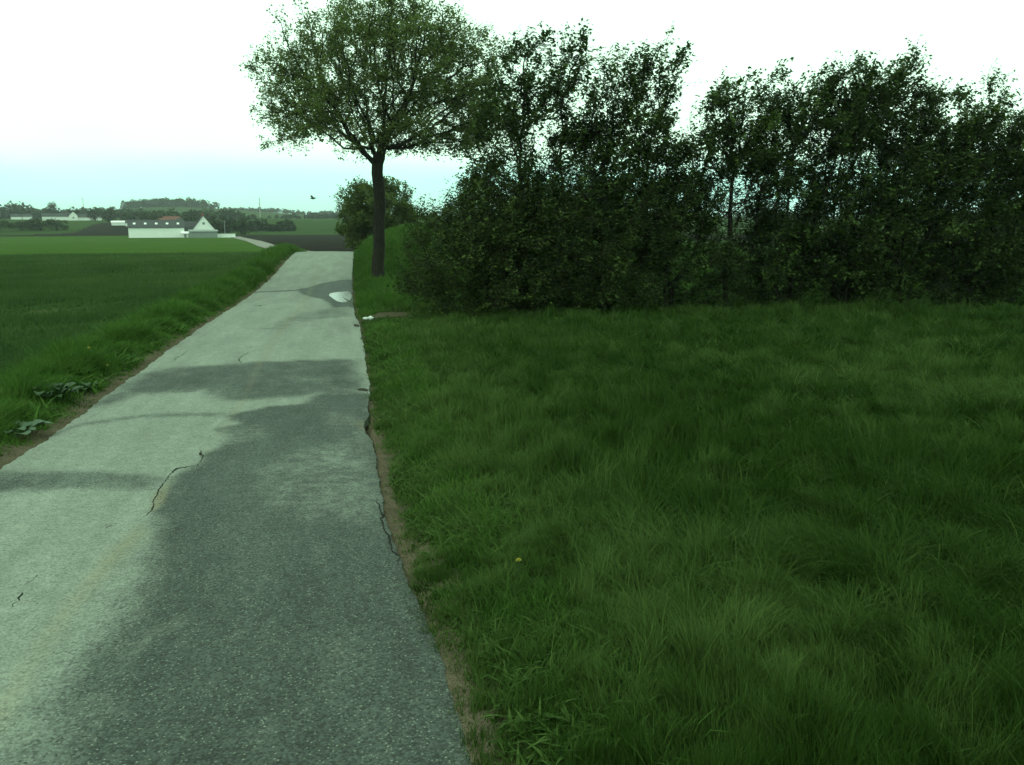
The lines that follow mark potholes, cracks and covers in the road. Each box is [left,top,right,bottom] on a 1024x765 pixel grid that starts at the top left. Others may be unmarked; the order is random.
crack [106,450,204,528]
crack [376,501,400,564]
